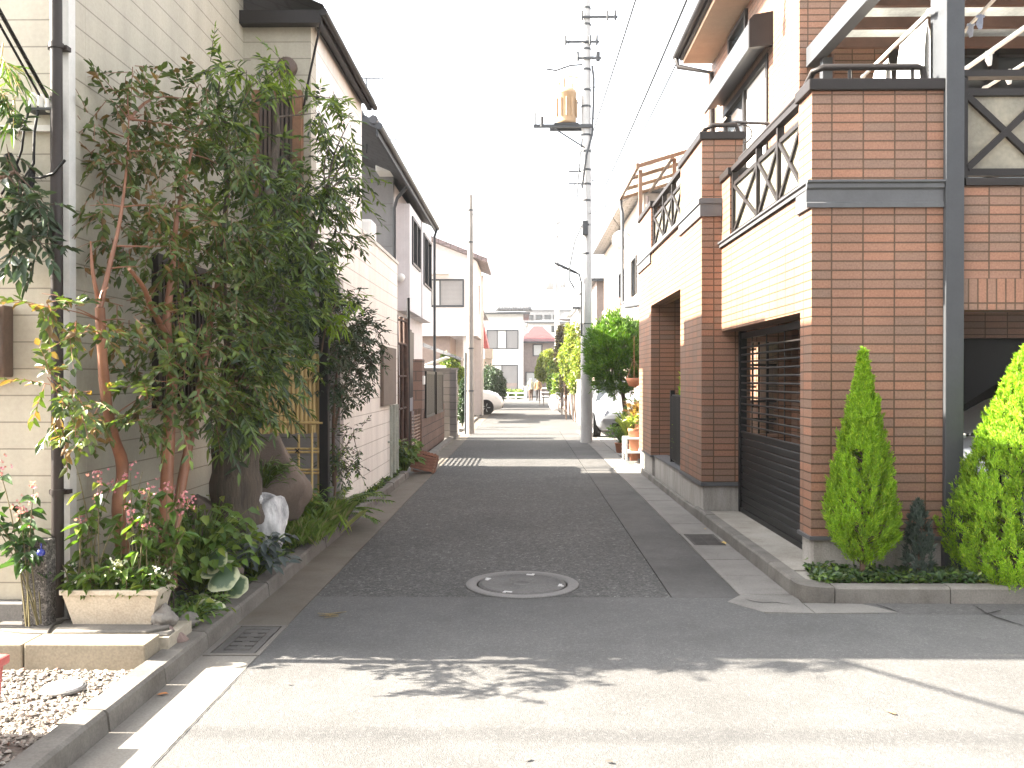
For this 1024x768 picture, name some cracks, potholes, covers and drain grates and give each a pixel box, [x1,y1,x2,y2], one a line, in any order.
drain grate [203,625,288,657]
manhole cover [465,571,579,599]
crack [973,605,1023,626]
drain grate [680,534,730,548]
